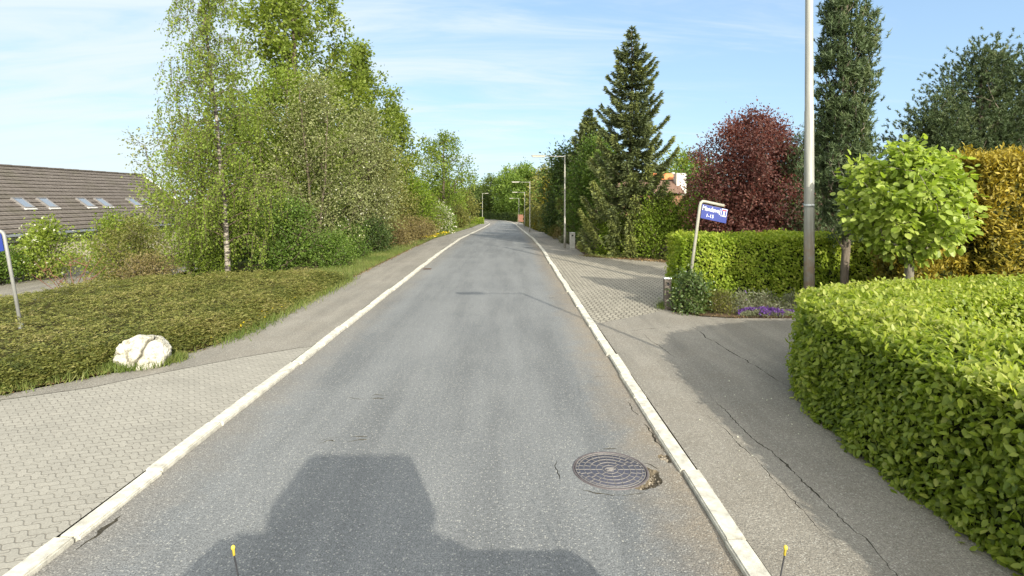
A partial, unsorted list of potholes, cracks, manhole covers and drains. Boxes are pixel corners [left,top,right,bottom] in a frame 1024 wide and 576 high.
manhole cover [573,452,649,490]
pothole [634,467,663,490]
crack [704,397,898,576]
crack [628,402,664,469]
